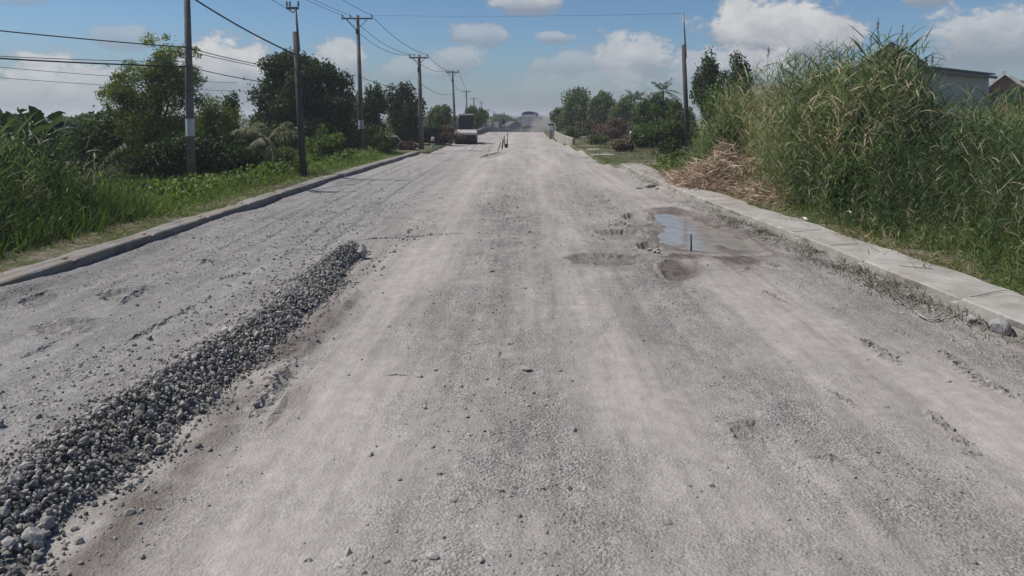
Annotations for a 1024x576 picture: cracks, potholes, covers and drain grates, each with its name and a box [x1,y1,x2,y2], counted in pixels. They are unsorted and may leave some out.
pothole [714,416,779,447]
pothole [616,212,653,225]
pothole [589,228,646,240]
pothole [652,258,702,283]
pothole [636,207,774,257]
pothole [557,252,657,268]
crack [118,289,197,341]
